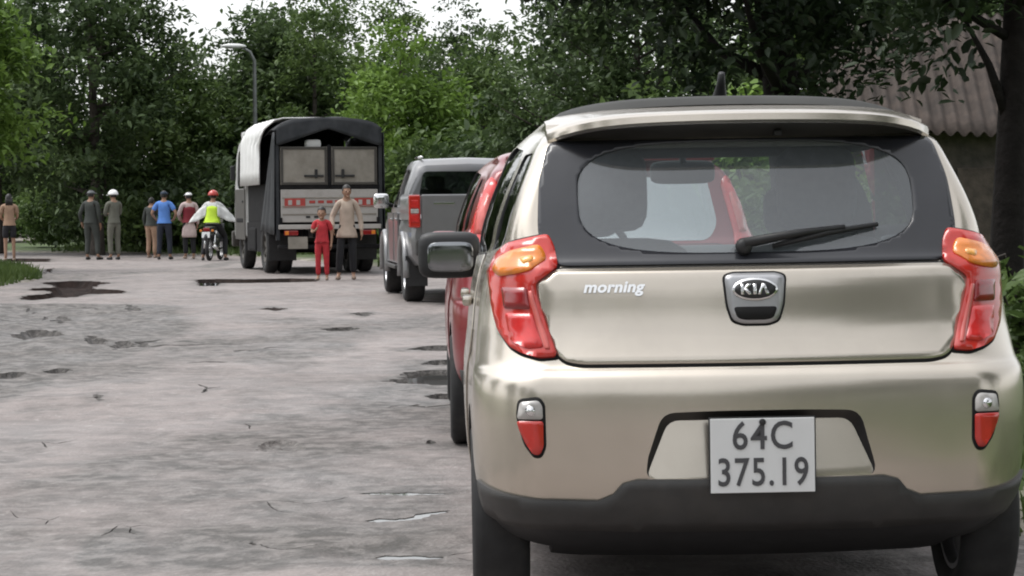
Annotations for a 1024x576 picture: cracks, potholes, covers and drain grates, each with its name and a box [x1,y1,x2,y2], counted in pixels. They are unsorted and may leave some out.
pothole [19,281,126,300]
pothole [382,370,447,385]
pothole [109,340,137,350]
pothole [84,335,108,344]
pothole [194,278,319,286]
pothole [10,330,64,340]
pothole [255,439,306,453]
